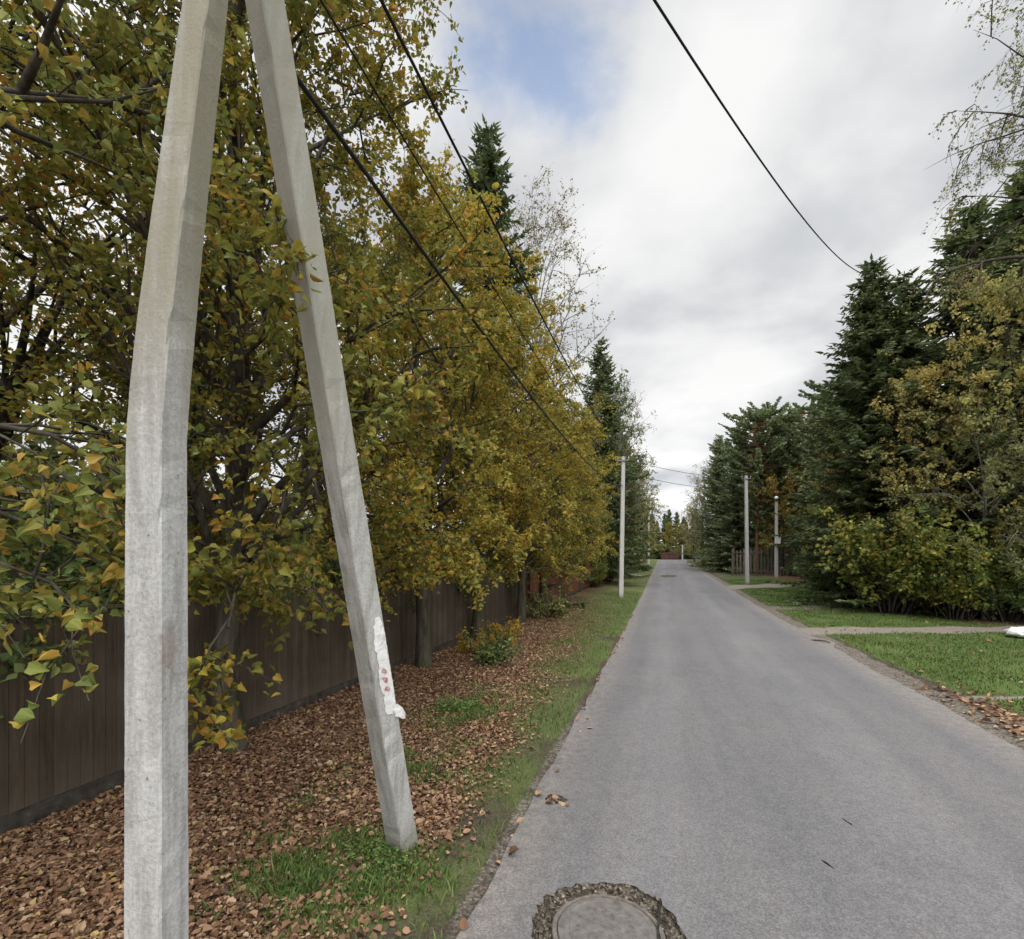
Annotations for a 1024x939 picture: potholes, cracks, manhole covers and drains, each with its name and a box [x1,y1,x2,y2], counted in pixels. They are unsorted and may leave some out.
manhole cover [551,894,665,939]
